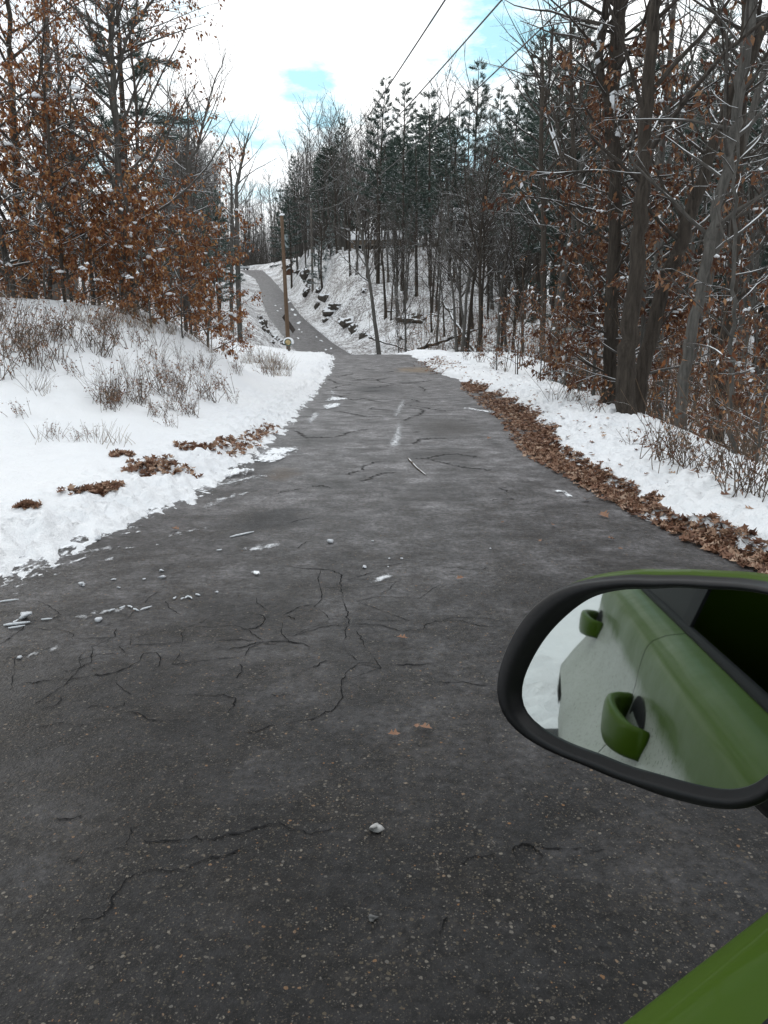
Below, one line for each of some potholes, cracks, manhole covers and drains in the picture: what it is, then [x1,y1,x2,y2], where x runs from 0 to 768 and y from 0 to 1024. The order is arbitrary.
crack [0,561,500,733]
crack [462,844,605,864]
crack [294,369,508,501]
crack [67,820,332,931]
